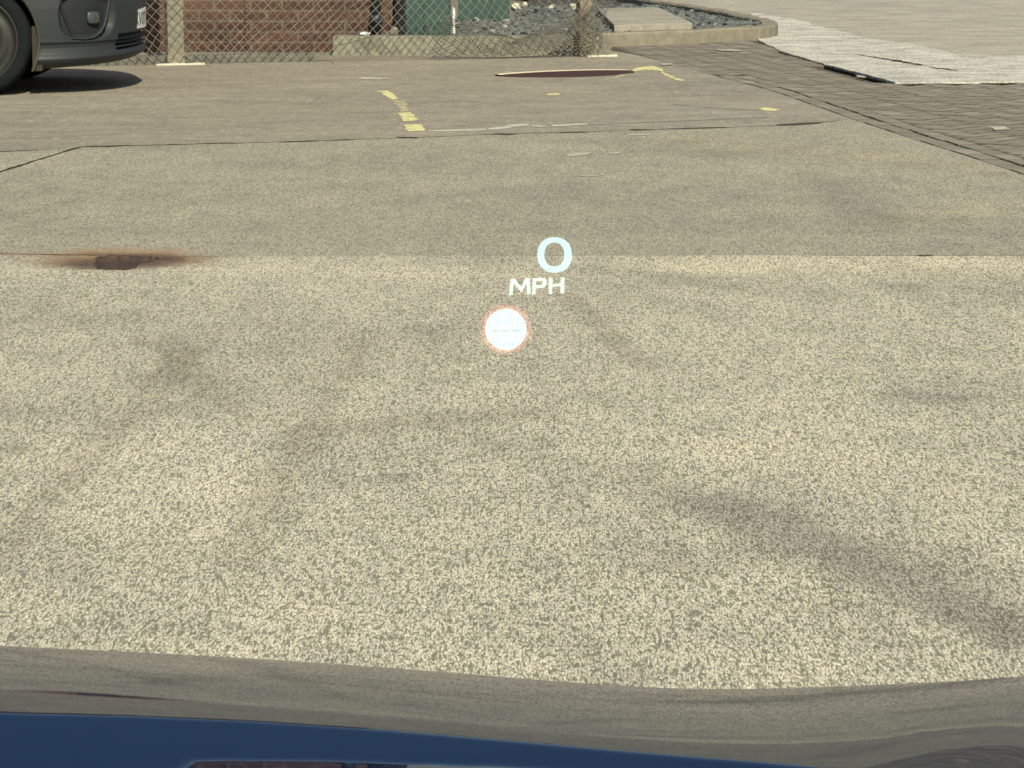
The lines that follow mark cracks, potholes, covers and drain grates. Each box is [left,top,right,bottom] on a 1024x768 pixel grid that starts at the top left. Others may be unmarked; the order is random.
pothole [94,255,159,270]
